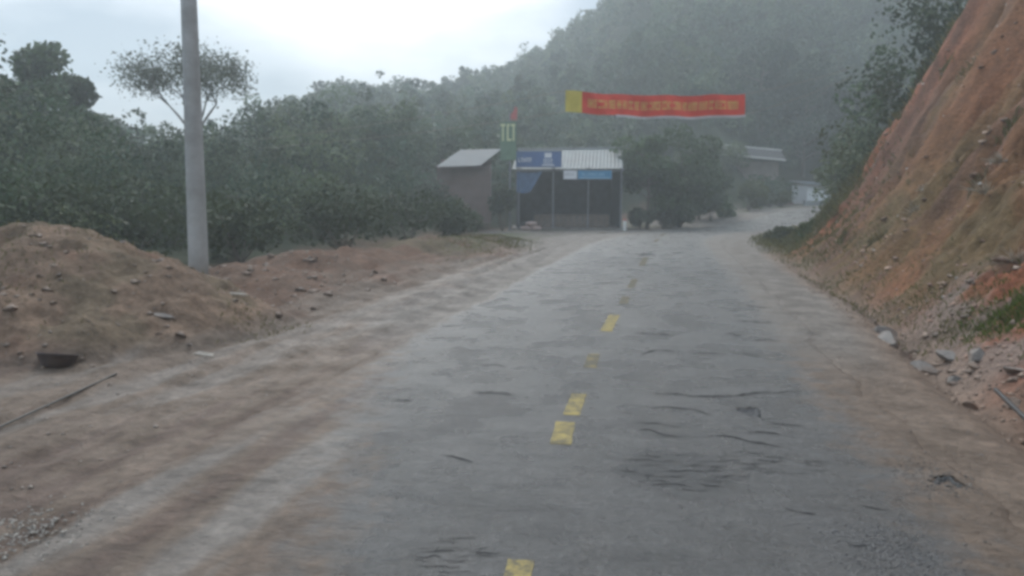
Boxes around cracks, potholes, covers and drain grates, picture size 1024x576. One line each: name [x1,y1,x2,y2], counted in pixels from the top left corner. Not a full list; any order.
crack [635,391,798,437]
crack [413,537,501,573]
pothole [933,476,963,488]
crack [621,423,827,491]
pothole [737,408,761,417]
